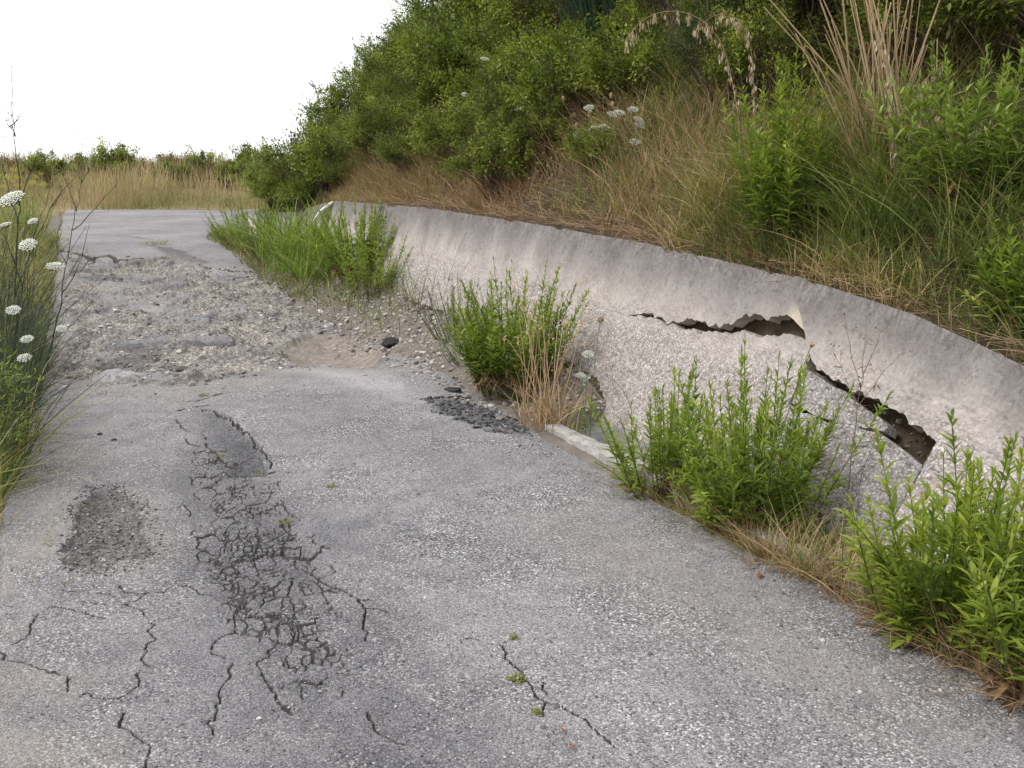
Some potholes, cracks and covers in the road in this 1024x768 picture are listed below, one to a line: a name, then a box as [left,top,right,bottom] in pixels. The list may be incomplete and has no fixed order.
crack [0,393,389,768]
pothole [45,256,392,386]
crack [465,637,615,748]
pothole [62,487,154,574]
